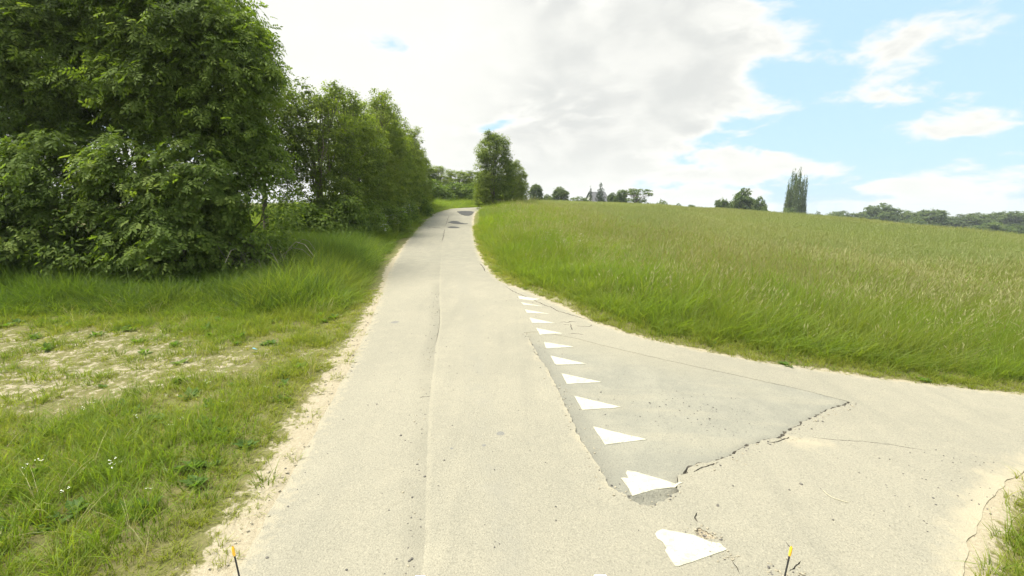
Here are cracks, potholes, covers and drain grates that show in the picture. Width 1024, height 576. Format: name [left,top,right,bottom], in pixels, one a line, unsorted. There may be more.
crack [510,289,592,335]
crack [677,402,922,483]
